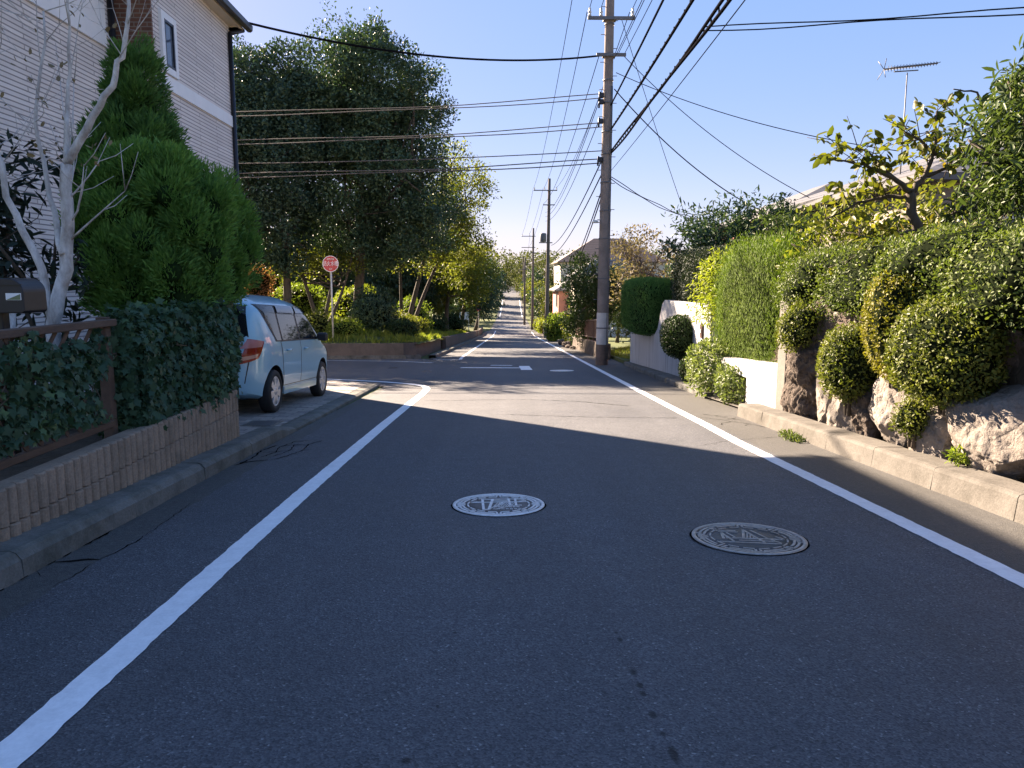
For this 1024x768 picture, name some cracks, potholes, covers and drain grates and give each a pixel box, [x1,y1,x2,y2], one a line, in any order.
manhole cover [689,522,810,556]
manhole cover [451,493,546,517]
crack [237,441,320,465]
crack [0,503,190,591]
